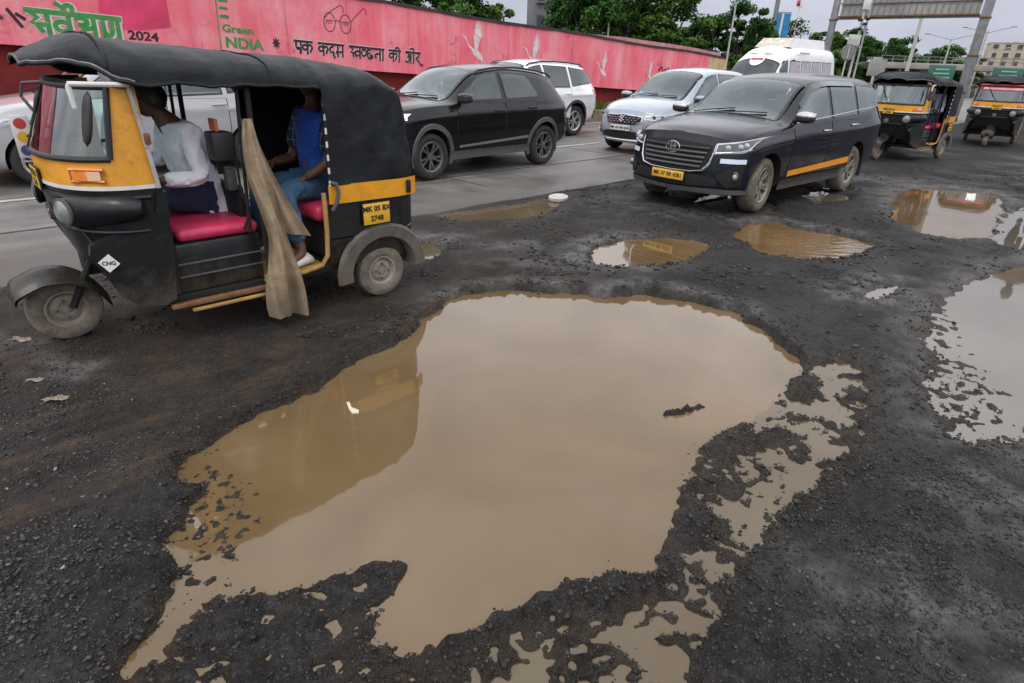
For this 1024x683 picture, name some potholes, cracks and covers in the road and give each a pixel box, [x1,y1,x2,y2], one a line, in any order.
pothole [899,255,1024,457]
pothole [420,195,570,223]
pothole [577,233,724,268]
pothole [880,185,1017,242]
pothole [723,216,887,261]
pothole [67,279,809,683]
pothole [666,340,902,643]
pothole [794,181,863,205]
pothole [984,200,1024,250]
